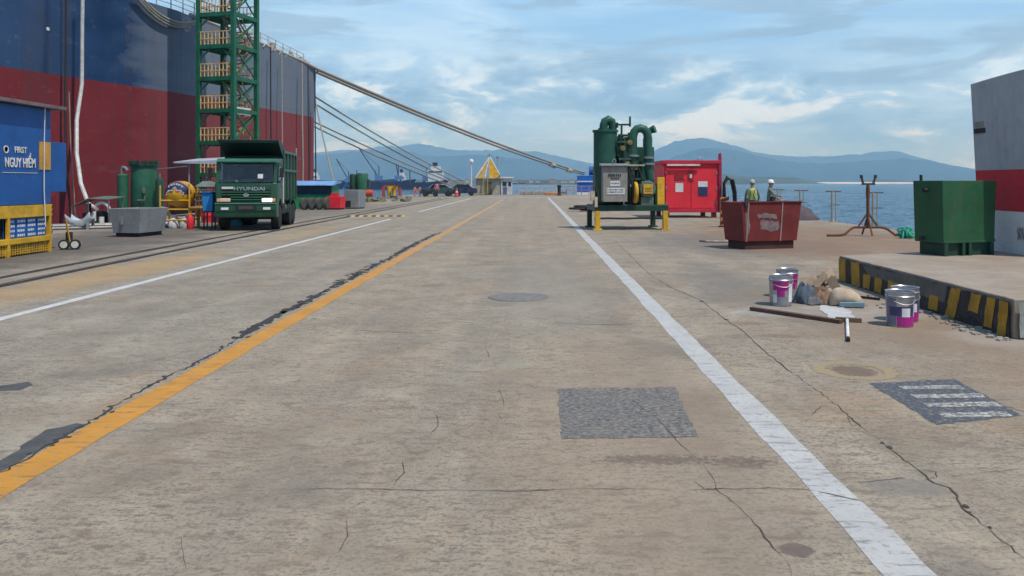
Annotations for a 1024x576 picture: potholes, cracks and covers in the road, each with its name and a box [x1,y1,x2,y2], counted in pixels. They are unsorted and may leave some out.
crack [627,253,1021,555]
manhole cover [488,293,548,302]
crack [312,400,860,572]
